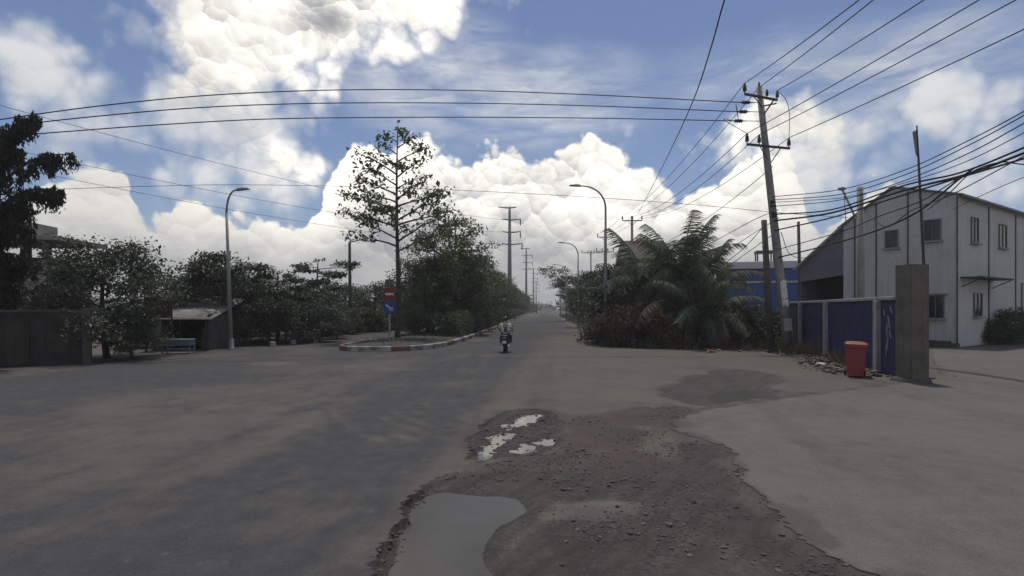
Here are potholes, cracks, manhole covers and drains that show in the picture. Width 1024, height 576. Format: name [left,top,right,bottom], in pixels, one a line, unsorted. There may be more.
pothole [480,406,878,576]
pothole [368,470,562,576]
